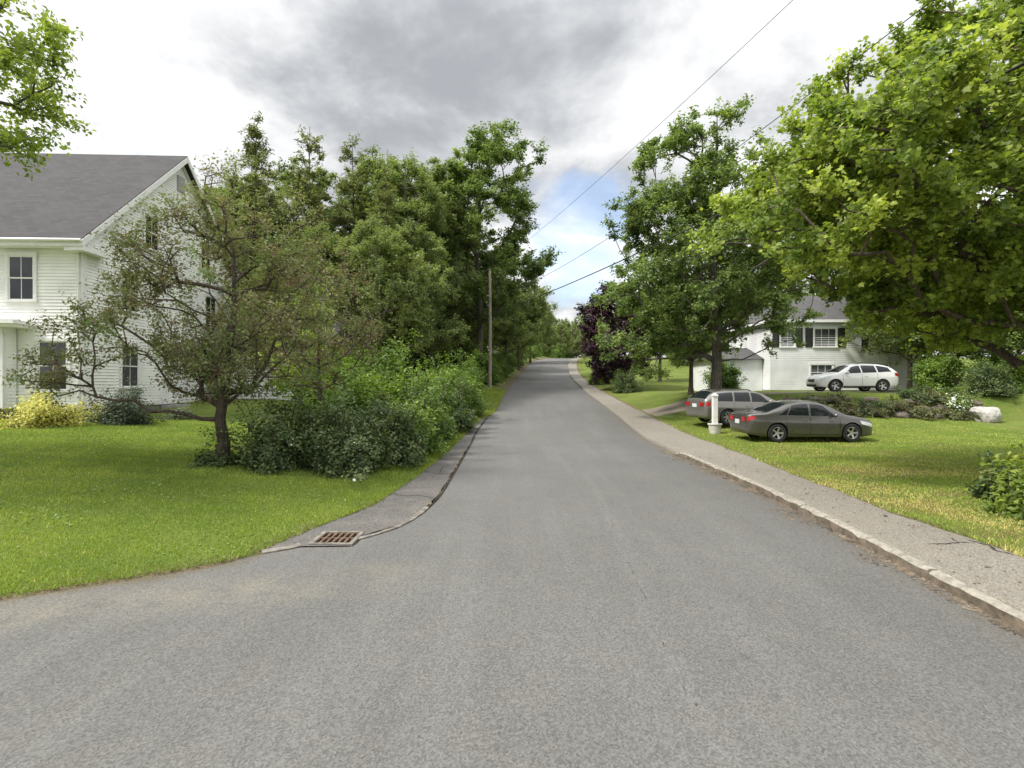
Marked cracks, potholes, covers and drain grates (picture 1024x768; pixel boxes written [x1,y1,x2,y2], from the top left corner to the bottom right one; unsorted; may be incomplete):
crack [931,537,1014,555]
drain grate [307,531,365,547]
